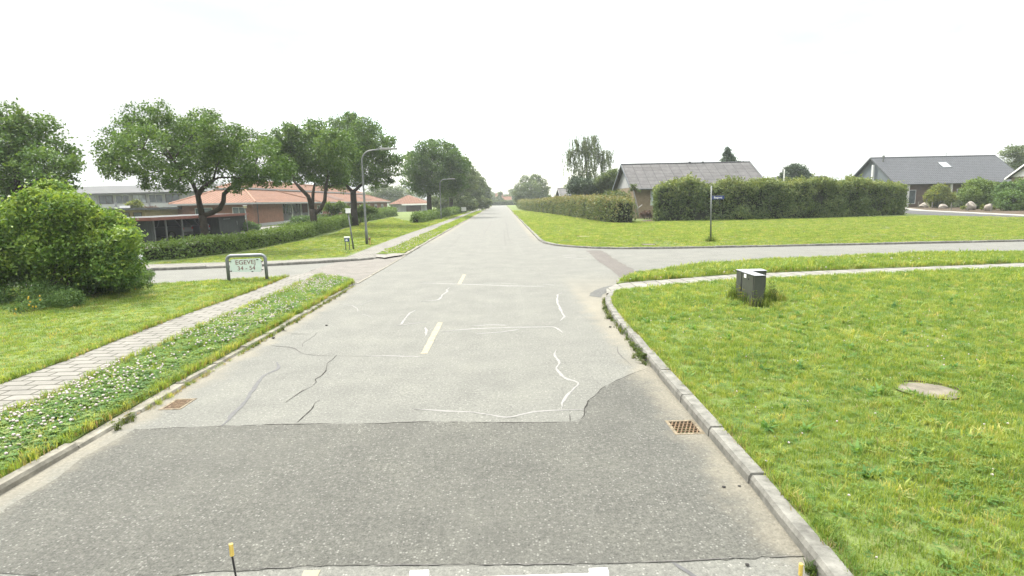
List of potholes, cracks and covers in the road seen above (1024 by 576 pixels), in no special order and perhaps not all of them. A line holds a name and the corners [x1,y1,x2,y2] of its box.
manhole cover [895,380,964,400]
drain grate [158,398,197,410]
crack [273,333,335,421]
drain grate [665,420,705,435]
